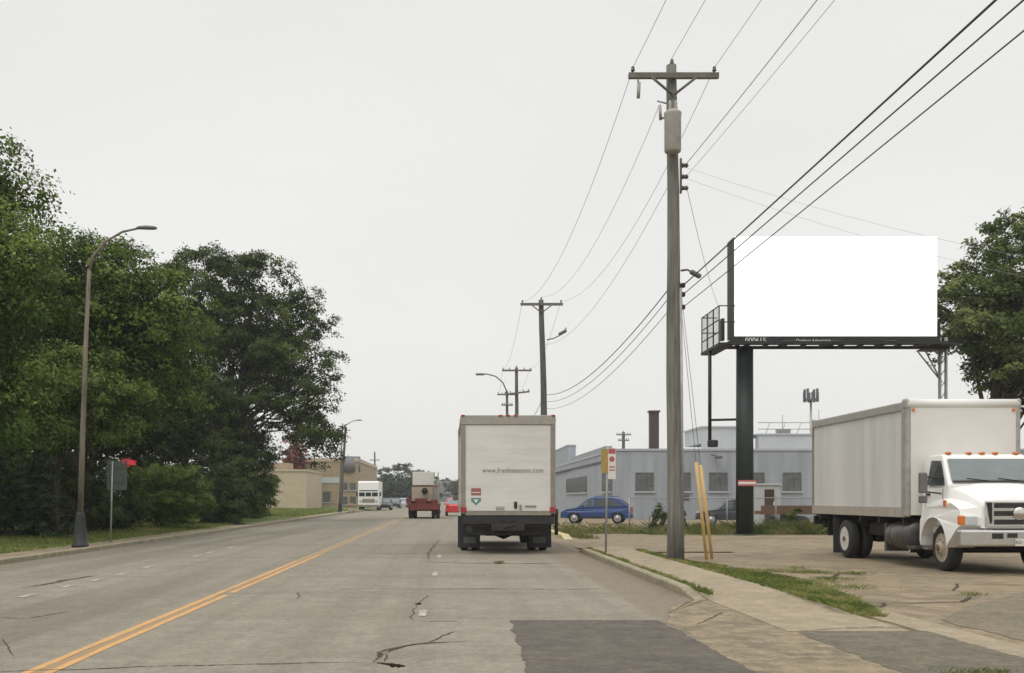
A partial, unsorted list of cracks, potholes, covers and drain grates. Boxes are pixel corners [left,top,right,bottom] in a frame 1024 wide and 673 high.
crack [29,575,95,587]
crack [0,631,463,672]
crack [879,584,997,607]
